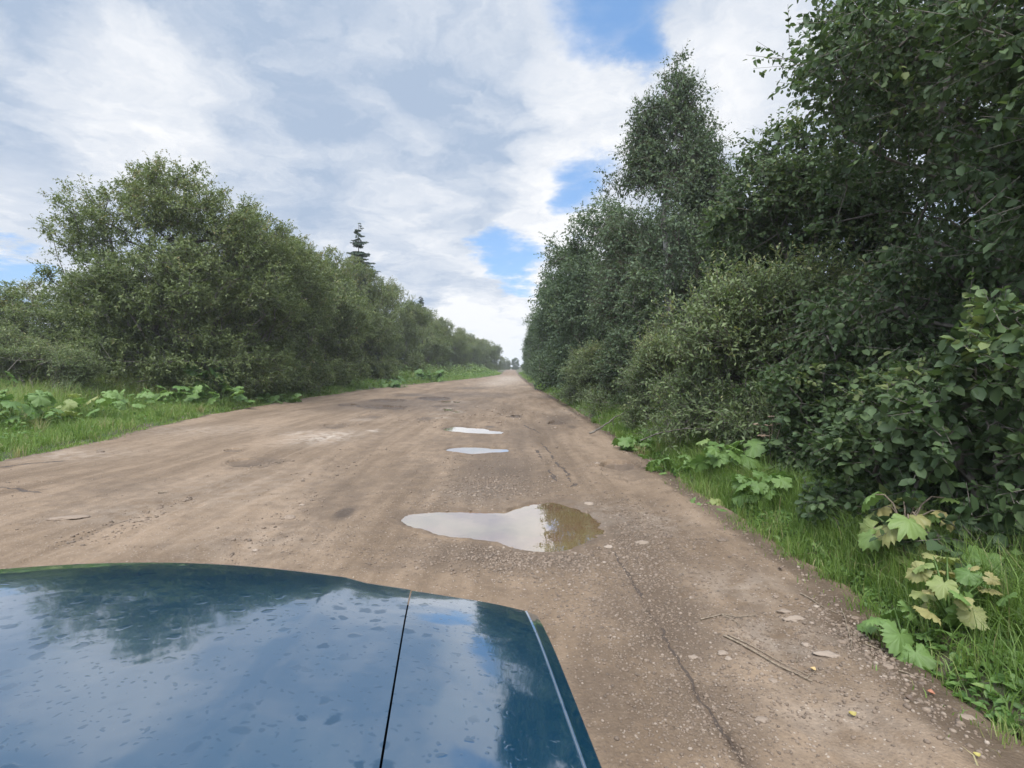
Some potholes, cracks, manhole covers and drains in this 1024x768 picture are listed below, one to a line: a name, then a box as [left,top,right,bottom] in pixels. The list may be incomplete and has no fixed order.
pothole [437,425,510,435]
pothole [378,496,621,558]
crack [523,425,579,487]
crack [608,550,742,764]
pothole [439,445,516,455]
